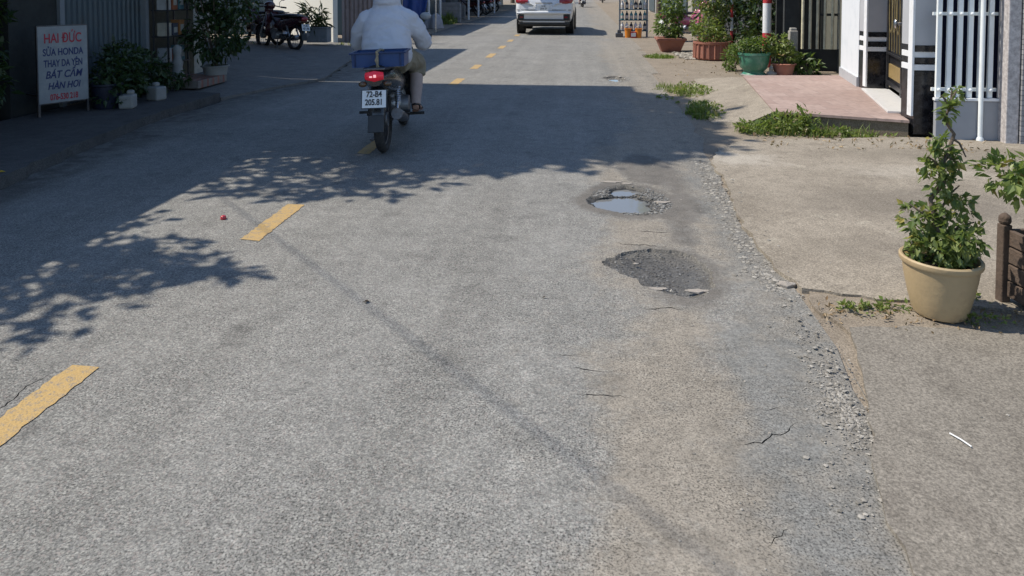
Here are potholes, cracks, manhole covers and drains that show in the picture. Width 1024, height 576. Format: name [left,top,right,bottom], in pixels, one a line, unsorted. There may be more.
crack [742,407,794,445]
pothole [602,248,716,298]
pothole [586,185,674,216]
